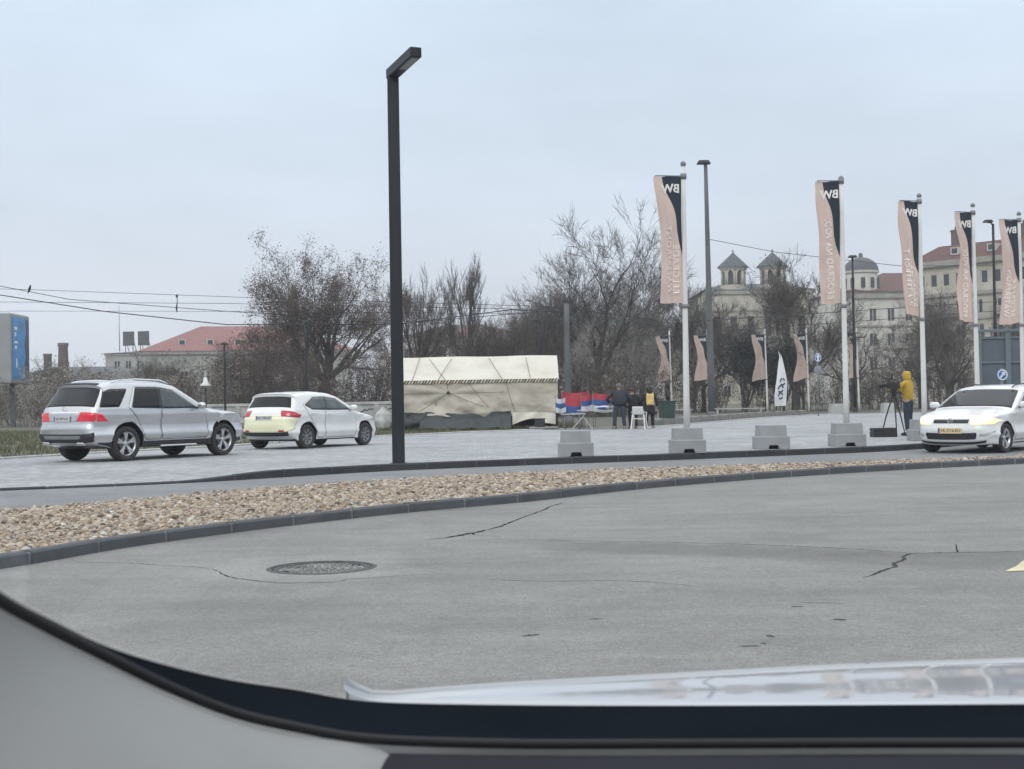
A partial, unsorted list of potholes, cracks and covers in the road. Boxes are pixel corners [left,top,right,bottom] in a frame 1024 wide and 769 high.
crack [428,503,562,540]
crack [864,544,1012,578]
manhole cover [266,561,377,575]
crack [85,562,430,583]
